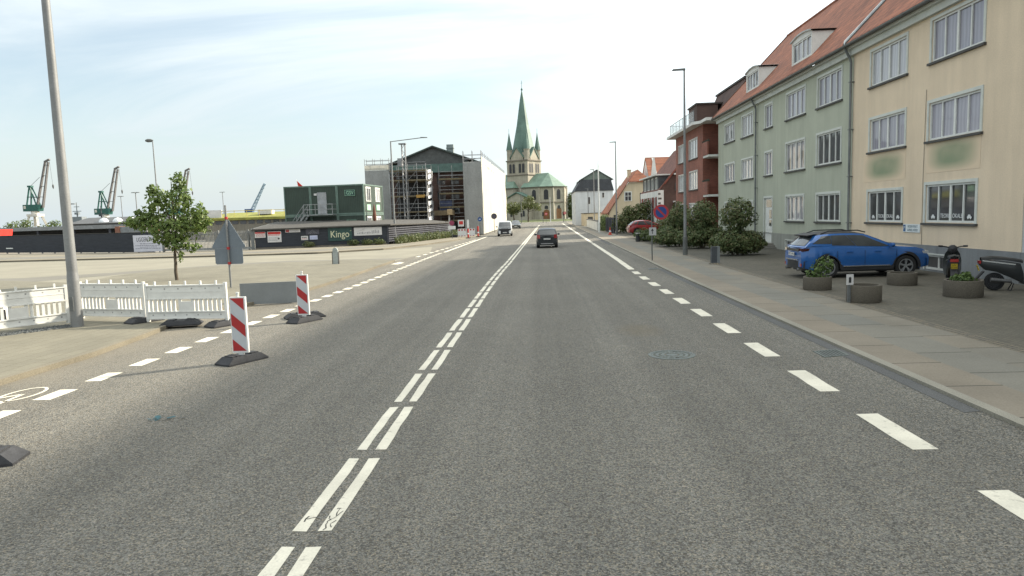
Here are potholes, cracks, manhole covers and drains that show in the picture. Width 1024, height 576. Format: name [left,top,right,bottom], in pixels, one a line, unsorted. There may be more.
manhole cover [648,350,696,360]
crack [304,508,343,530]
drain grate [813,349,849,357]
